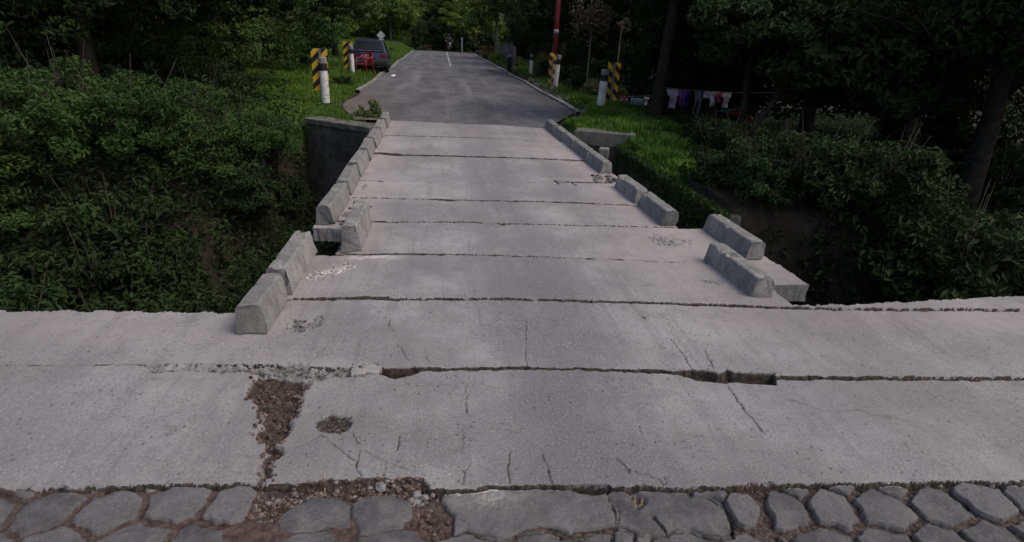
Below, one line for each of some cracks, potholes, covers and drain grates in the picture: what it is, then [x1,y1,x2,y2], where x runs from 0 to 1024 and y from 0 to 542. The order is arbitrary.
crack [670,338,766,434]
crack [387,317,430,362]
pothole [314,412,355,434]
pothole [287,314,326,333]
pothole [307,262,360,281]
pothole [646,235,694,246]
pothole [243,375,315,492]
crack [0,382,1024,542]
